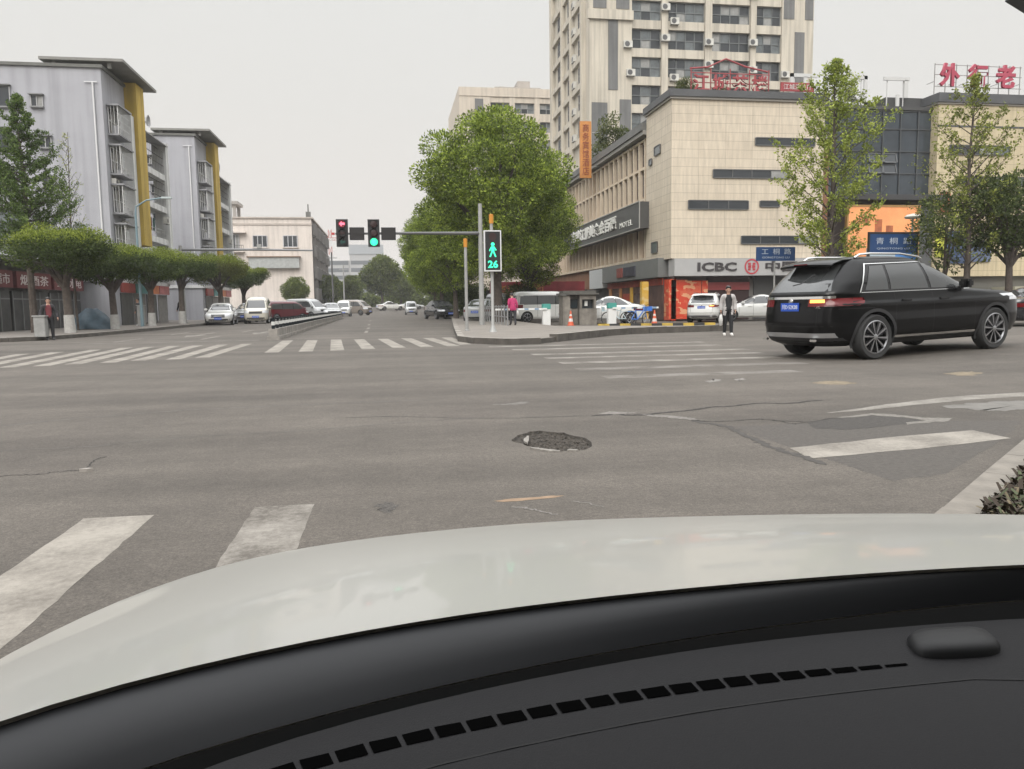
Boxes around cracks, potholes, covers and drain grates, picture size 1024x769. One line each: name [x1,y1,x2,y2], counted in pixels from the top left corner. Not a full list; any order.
crack [592,400,831,424]
pothole [512,431,592,453]
